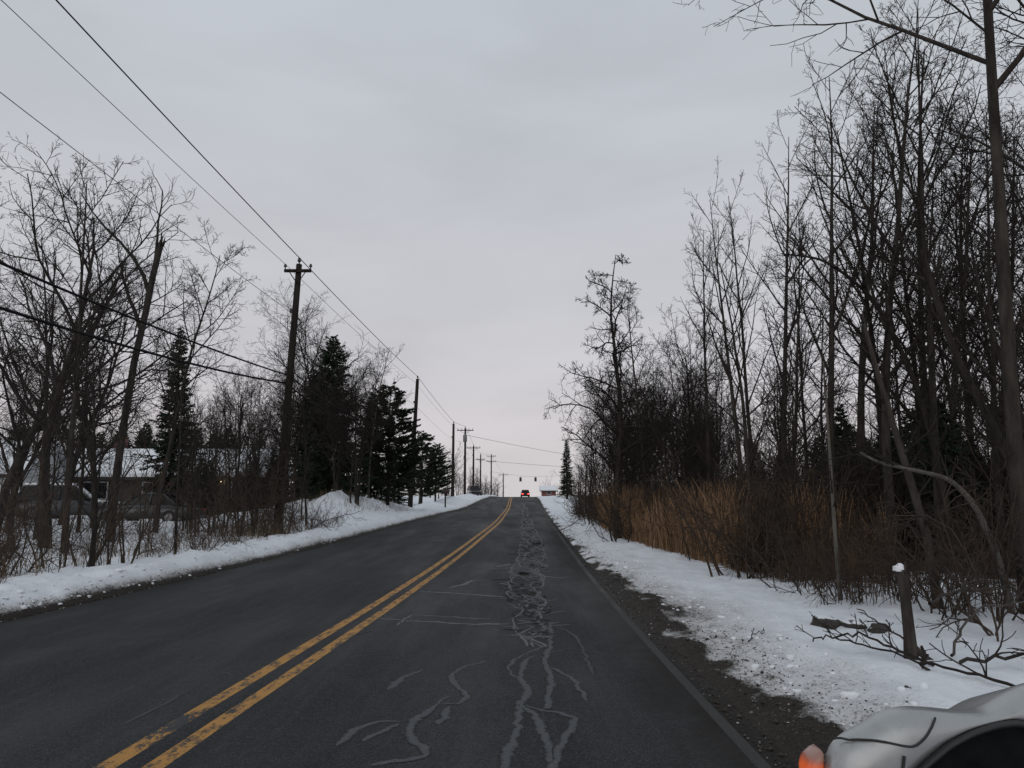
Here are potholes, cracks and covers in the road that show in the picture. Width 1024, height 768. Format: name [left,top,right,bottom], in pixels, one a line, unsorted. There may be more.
crack [335,502,606,768]
